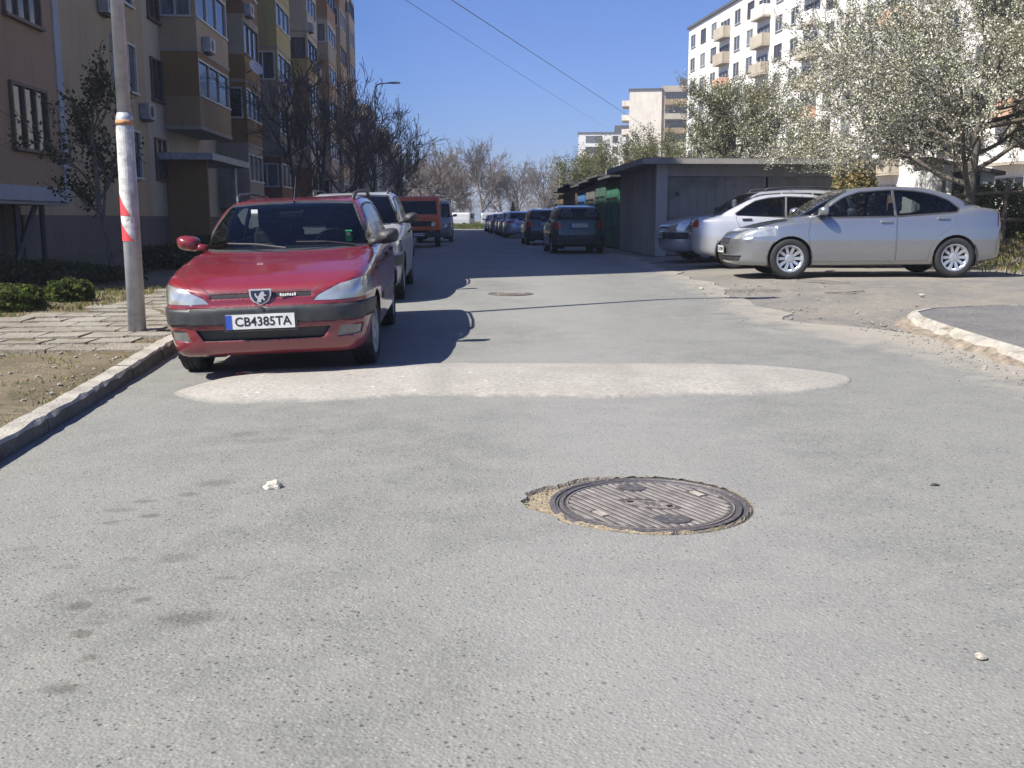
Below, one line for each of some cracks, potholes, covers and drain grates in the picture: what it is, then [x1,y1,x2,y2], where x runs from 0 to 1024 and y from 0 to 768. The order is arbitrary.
manhole cover [549,477,753,535]
